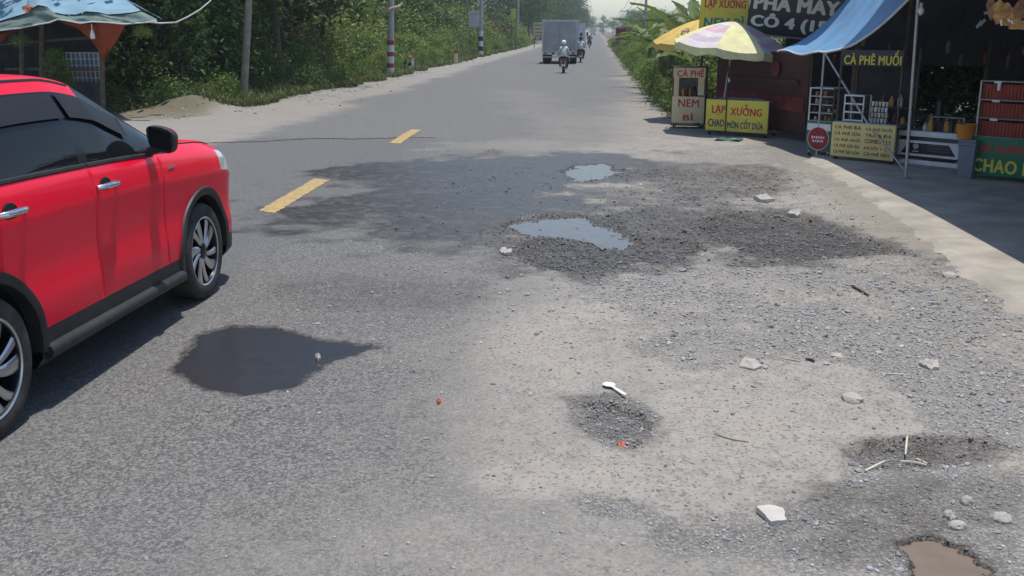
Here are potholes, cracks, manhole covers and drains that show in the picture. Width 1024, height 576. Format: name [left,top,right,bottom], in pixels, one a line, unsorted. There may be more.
pothole [557,163,624,183]
pothole [573,400,665,452]
pothole [495,210,709,276]
pothole [889,535,999,576]
pothole [841,432,1000,471]
